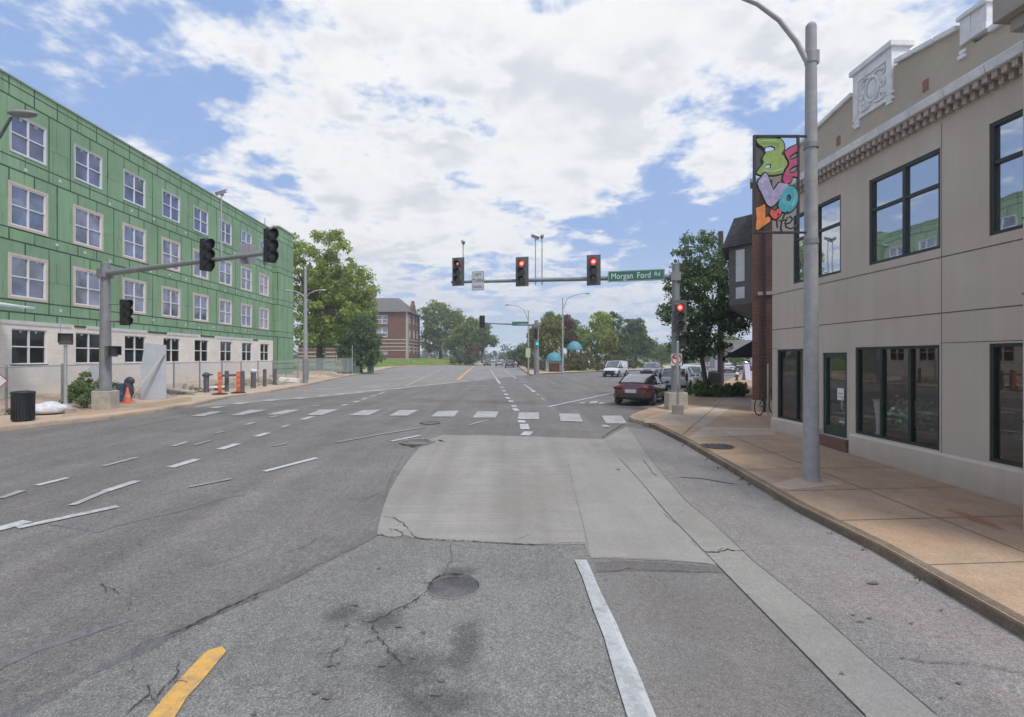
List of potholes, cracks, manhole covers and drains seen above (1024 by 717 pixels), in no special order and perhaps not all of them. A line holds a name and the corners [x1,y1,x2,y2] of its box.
crack [321,516,572,666]
manhole cover [426,575,481,600]
crack [125,647,187,714]
